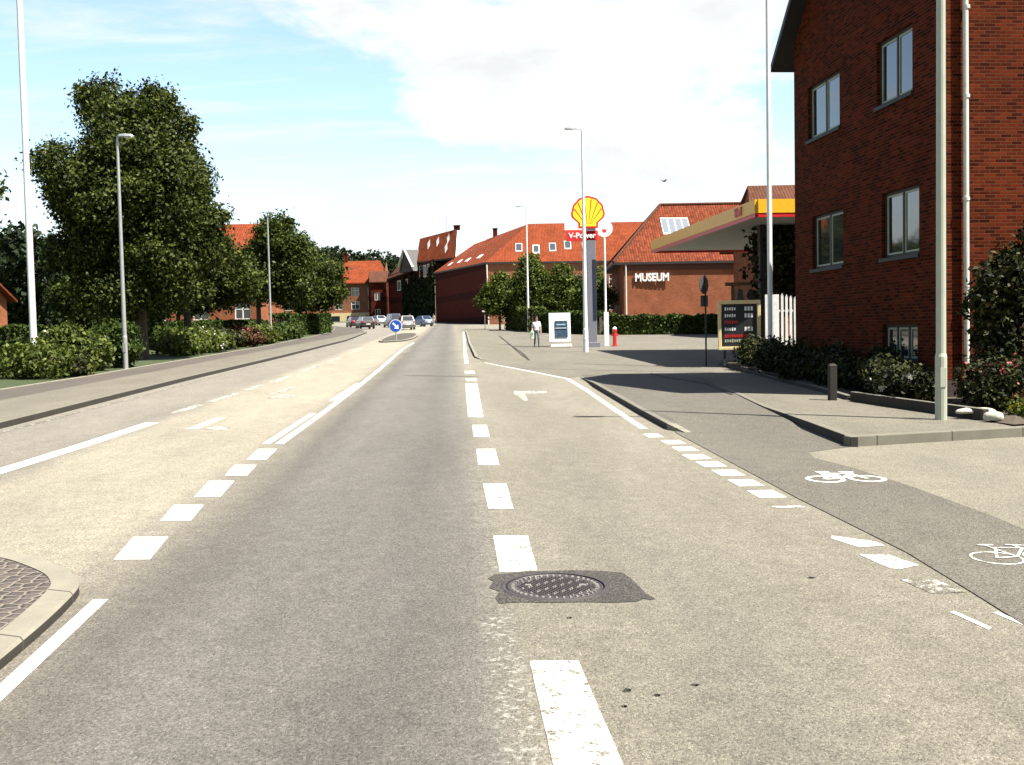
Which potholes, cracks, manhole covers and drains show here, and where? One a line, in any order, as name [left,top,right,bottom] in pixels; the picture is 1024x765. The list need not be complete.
manhole cover [501,572,610,601]
